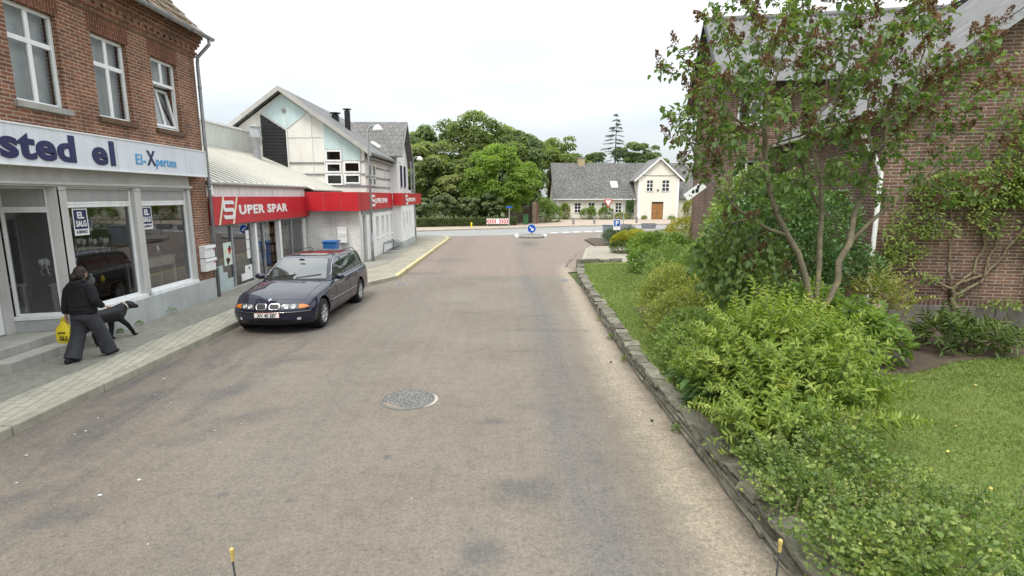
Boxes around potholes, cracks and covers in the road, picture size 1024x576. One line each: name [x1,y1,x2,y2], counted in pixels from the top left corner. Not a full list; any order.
manhole cover [380,389,438,410]
